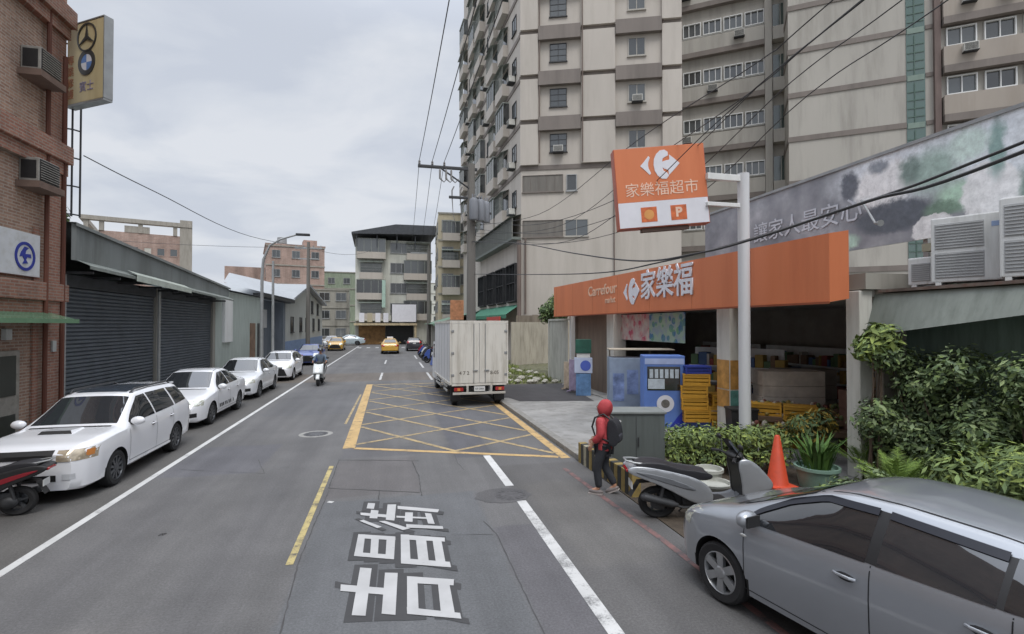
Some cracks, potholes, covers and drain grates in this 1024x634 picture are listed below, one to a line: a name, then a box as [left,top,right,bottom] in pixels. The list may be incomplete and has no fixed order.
manhole cover [474,488,532,503]
